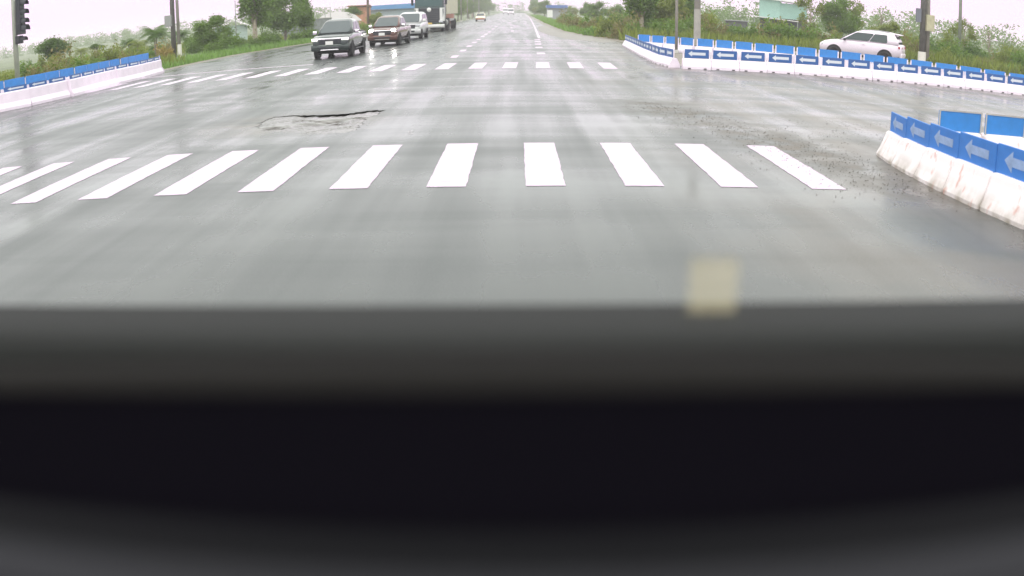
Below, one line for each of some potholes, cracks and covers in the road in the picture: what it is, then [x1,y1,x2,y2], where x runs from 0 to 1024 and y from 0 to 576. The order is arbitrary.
pothole [257,111,383,134]
